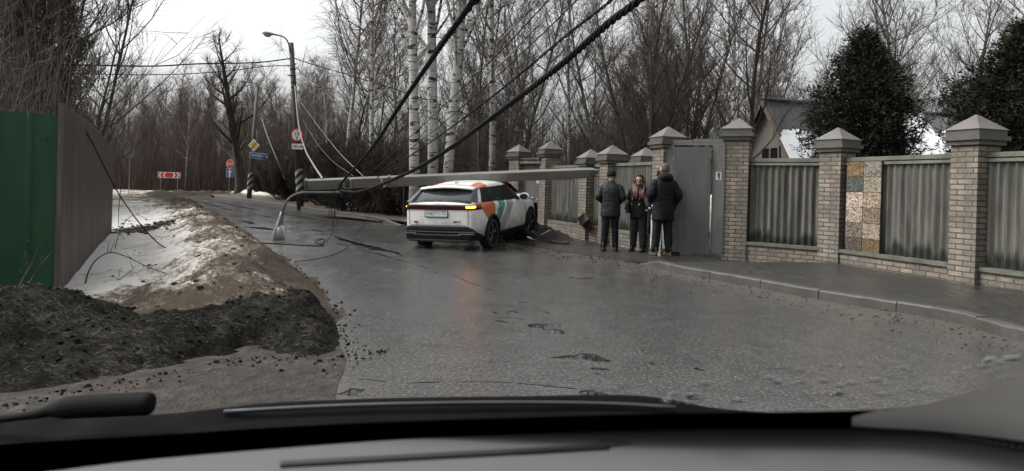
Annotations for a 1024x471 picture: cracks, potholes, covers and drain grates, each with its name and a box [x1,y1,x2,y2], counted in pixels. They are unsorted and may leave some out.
pothole [552,353,611,362]
pothole [336,388,365,397]
pothole [527,324,565,334]
